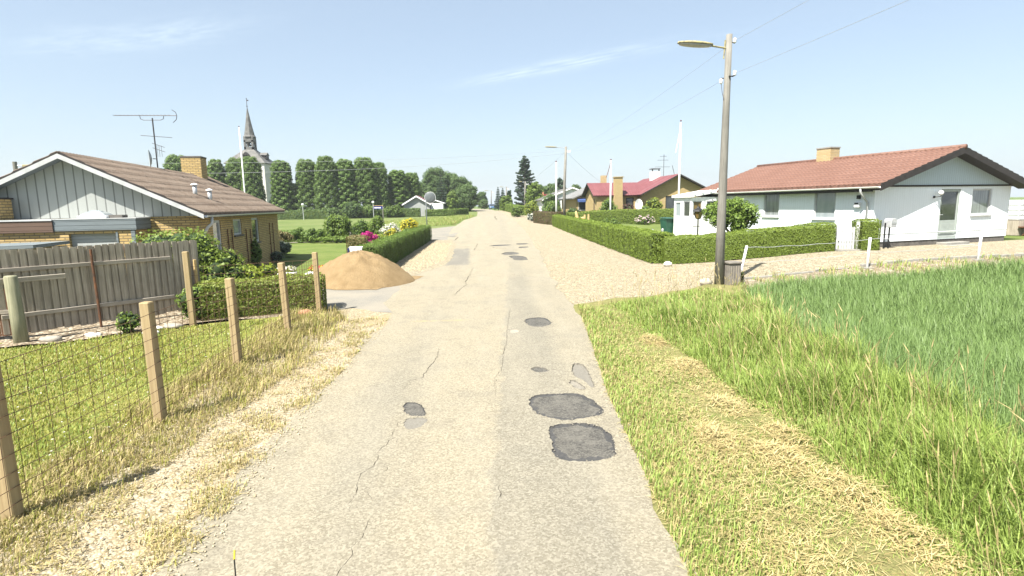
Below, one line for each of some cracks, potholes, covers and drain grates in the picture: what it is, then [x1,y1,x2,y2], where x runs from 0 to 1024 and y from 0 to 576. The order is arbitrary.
crack [337,417,406,575]
